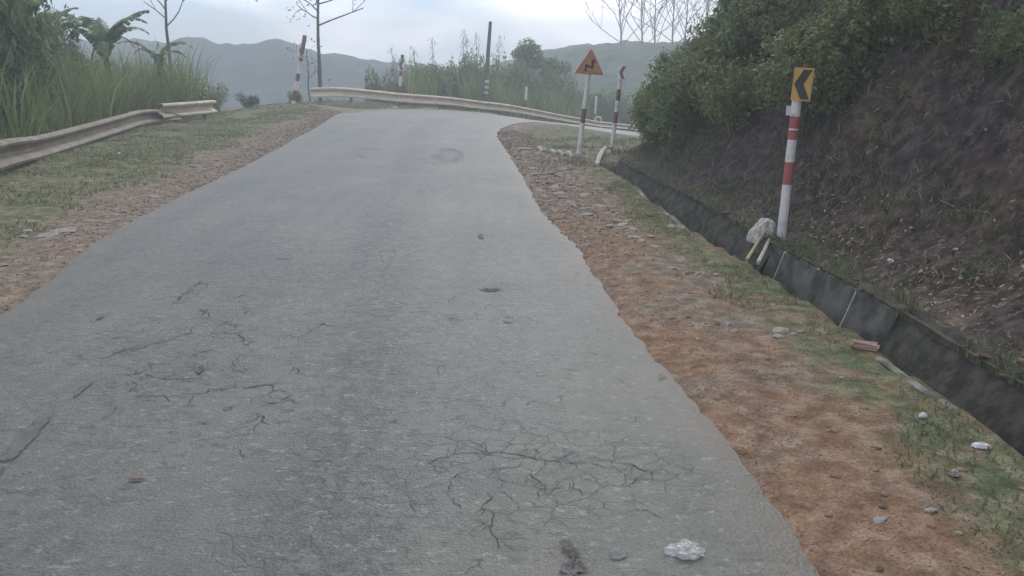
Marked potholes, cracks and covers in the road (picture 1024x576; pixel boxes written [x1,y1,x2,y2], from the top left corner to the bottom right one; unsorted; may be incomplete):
pothole [560,539,587,576]
crack [97,280,363,457]
crack [391,438,602,576]
